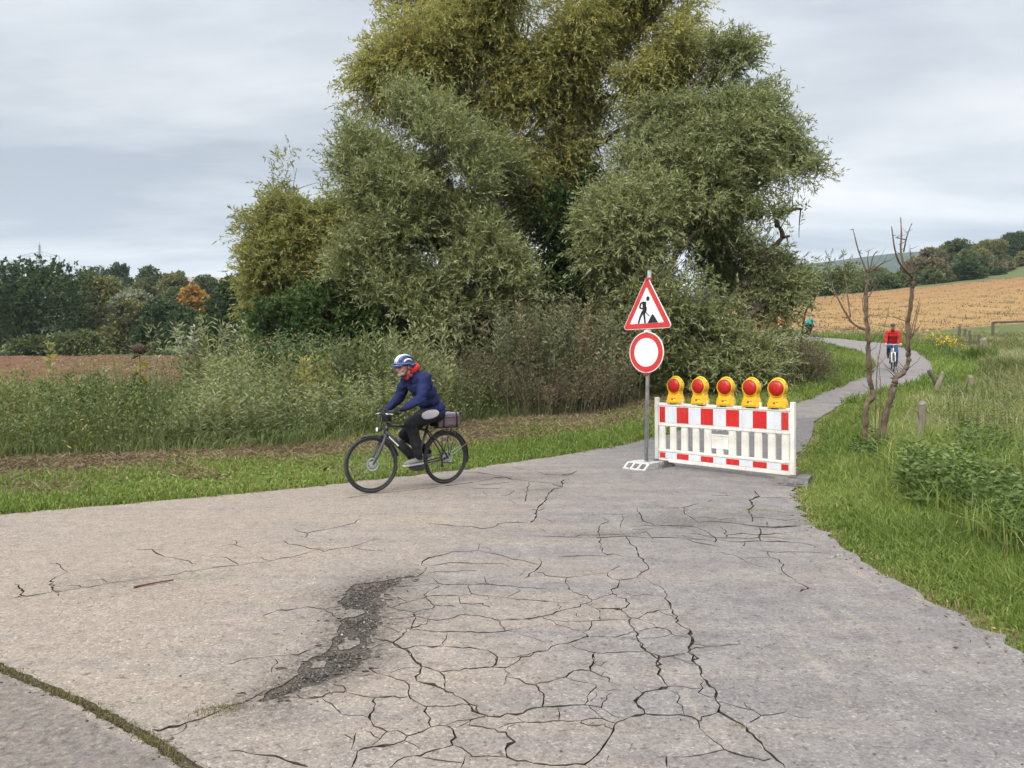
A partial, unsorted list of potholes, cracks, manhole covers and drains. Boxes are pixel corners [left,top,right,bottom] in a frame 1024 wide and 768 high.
crack [152,692,263,736]
crack [230,467,831,768]
pothole [237,575,418,702]
crack [11,520,376,599]
